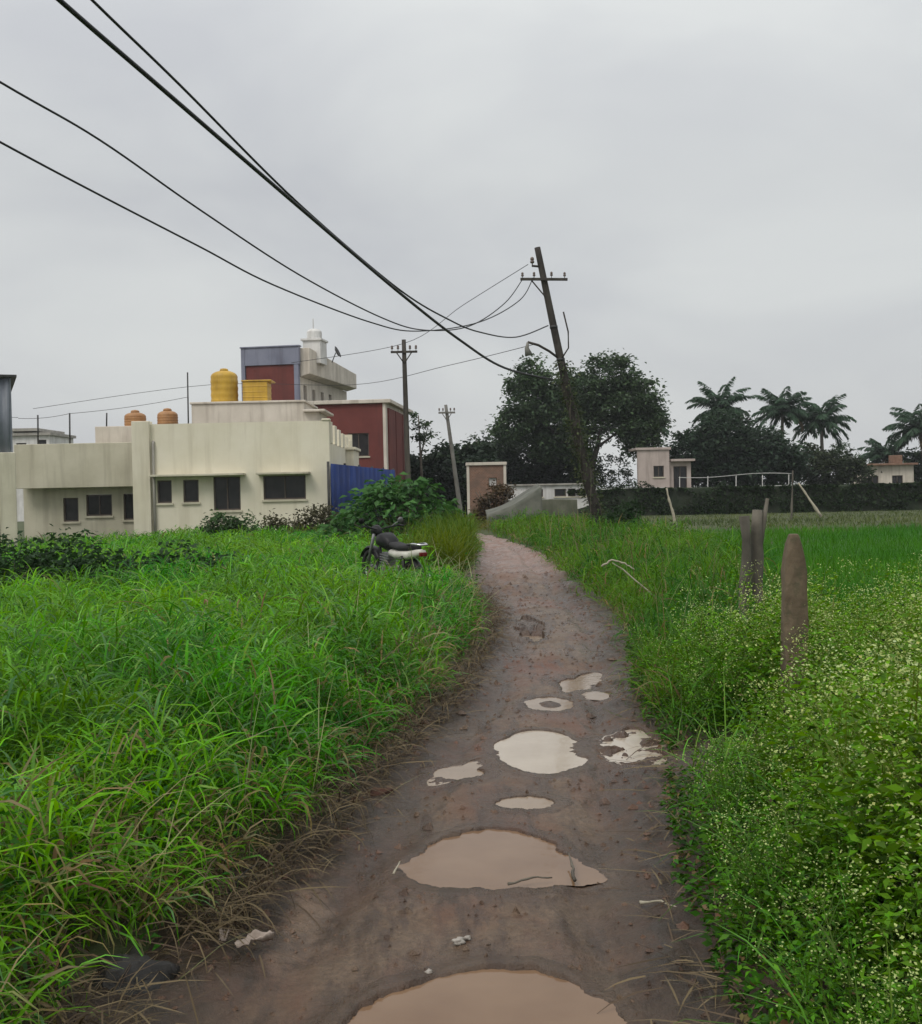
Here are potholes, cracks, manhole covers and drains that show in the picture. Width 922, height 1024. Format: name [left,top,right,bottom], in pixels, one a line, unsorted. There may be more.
pothole [379,820,627,898]
pothole [569,688,624,705]
pothole [511,694,587,714]
pothole [318,954,649,1024]
pothole [506,614,555,645]
pothole [476,790,574,815]
pothole [546,670,612,695]
pothole [569,723,685,771]
pothole [478,727,601,779]
pothole [413,754,503,792]
